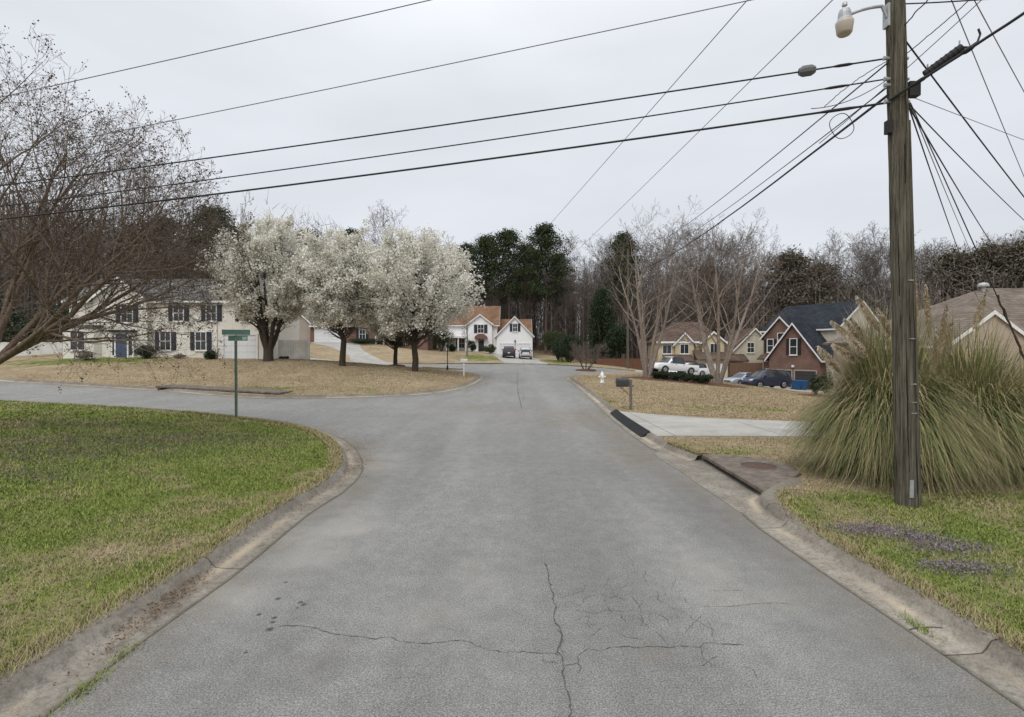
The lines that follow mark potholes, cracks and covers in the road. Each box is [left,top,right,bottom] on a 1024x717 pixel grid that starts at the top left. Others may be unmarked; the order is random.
crack [283,562,792,717]
manhole cover [738,462,780,470]
